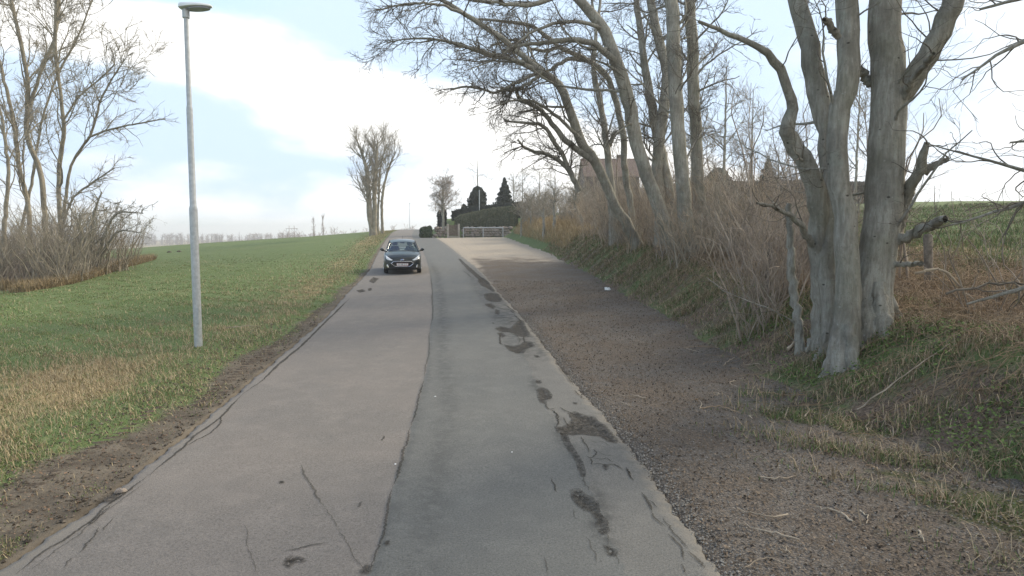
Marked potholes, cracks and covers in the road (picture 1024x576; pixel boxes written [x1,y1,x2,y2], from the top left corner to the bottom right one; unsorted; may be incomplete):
pothole [537,388,552,404]
crack [16,299,349,574]
crack [545,365,705,573]
pothole [556,412,618,442]
pothole [505,342,534,353]
pothole [571,490,609,534]
pothole [497,320,529,337]
pothole [484,293,502,302]
